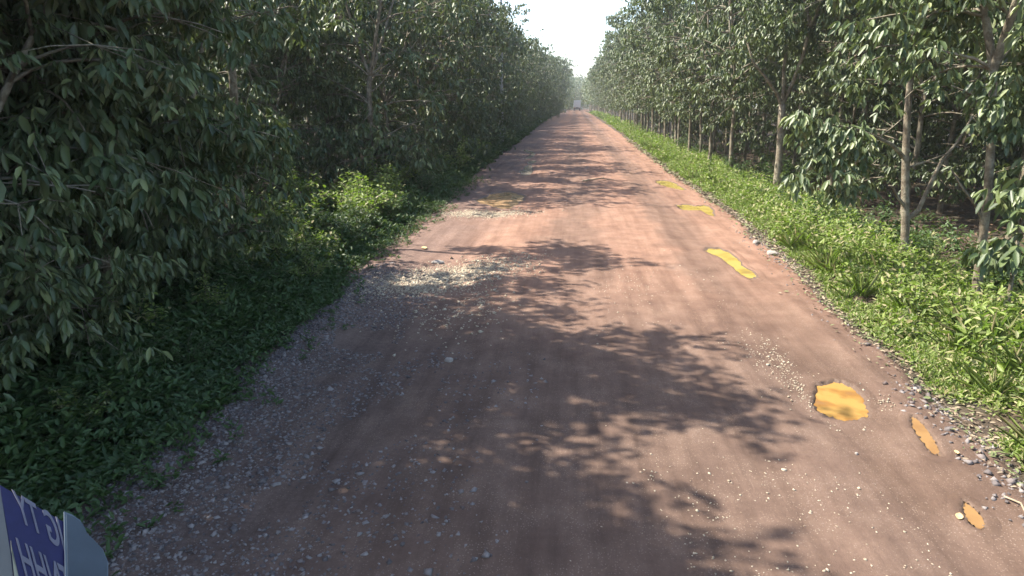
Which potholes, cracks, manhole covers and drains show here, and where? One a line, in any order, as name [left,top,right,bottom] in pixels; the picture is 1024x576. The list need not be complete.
pothole [947,493,1003,539]
pothole [669,203,722,218]
pothole [697,246,767,282]
pothole [898,410,955,463]
pothole [801,376,880,426]
pothole [650,179,693,191]
pothole [468,190,532,211]
